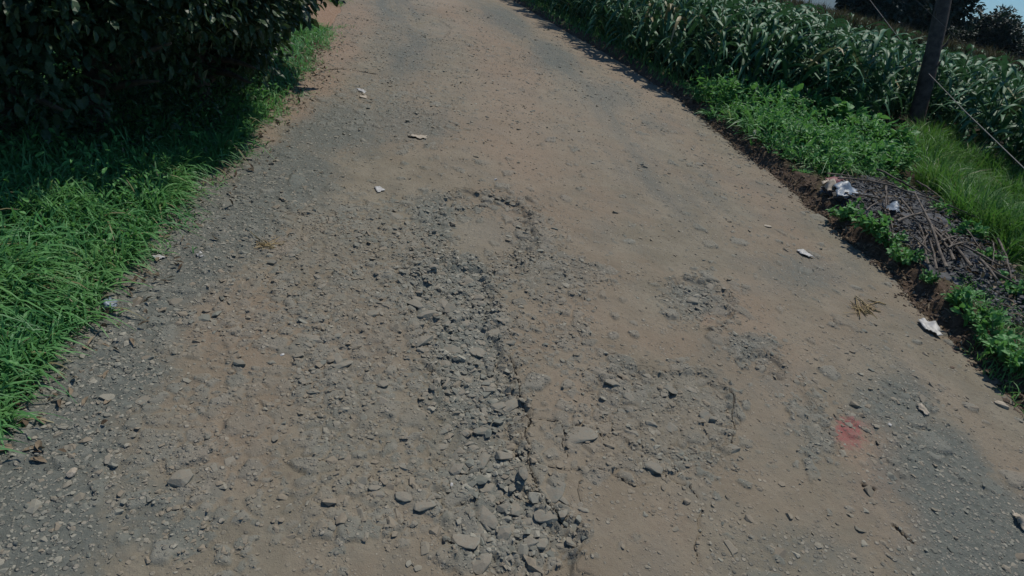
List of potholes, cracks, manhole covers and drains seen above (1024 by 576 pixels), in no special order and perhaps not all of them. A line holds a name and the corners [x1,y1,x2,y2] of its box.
pothole [665,275,738,334]
pothole [425,188,542,270]
pothole [733,347,788,381]
pothole [417,257,591,576]
pothole [584,361,741,476]
